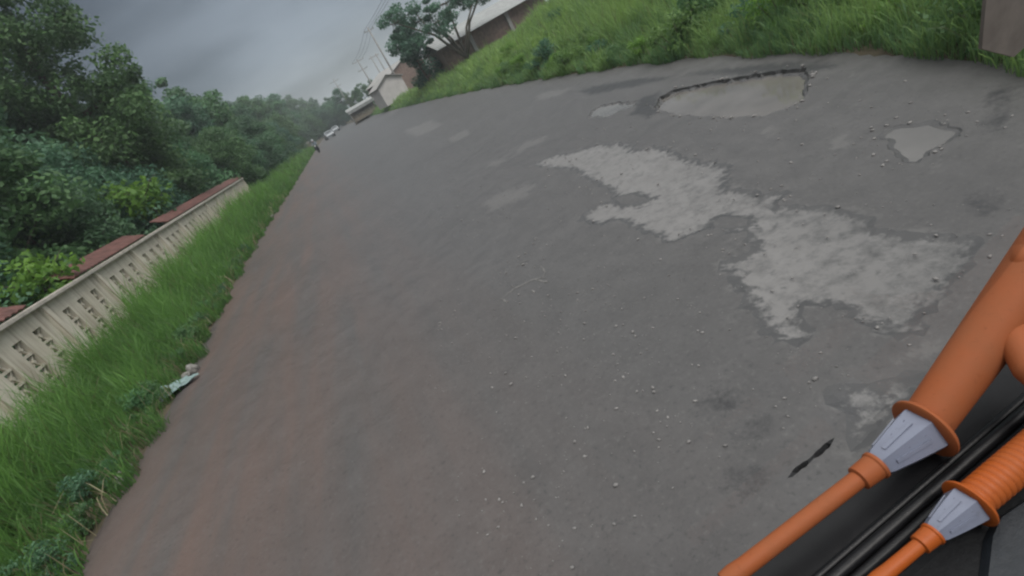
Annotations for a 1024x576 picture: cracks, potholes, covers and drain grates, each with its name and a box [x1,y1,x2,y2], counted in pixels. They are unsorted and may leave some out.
pothole [654,68,809,118]
crack [788,438,834,478]
pothole [874,119,963,164]
